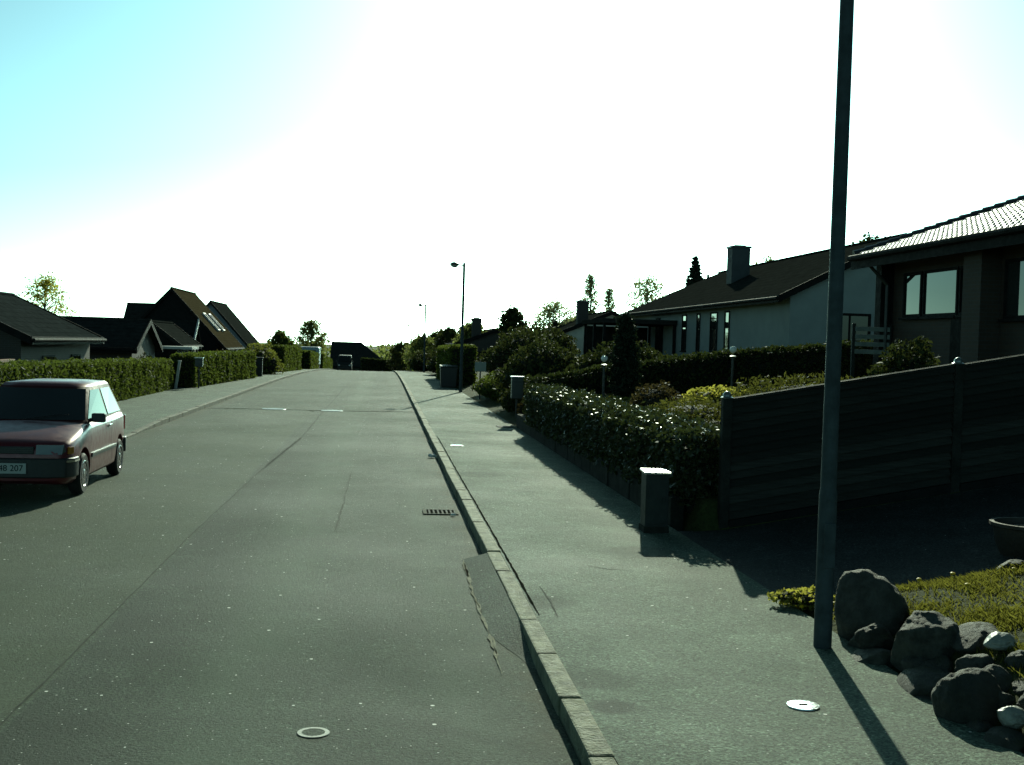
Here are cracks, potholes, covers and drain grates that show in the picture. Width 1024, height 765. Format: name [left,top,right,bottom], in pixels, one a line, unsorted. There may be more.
crack [334,471,352,532]
manhole cover [297,727,330,738]
manhole cover [786,700,820,711]
